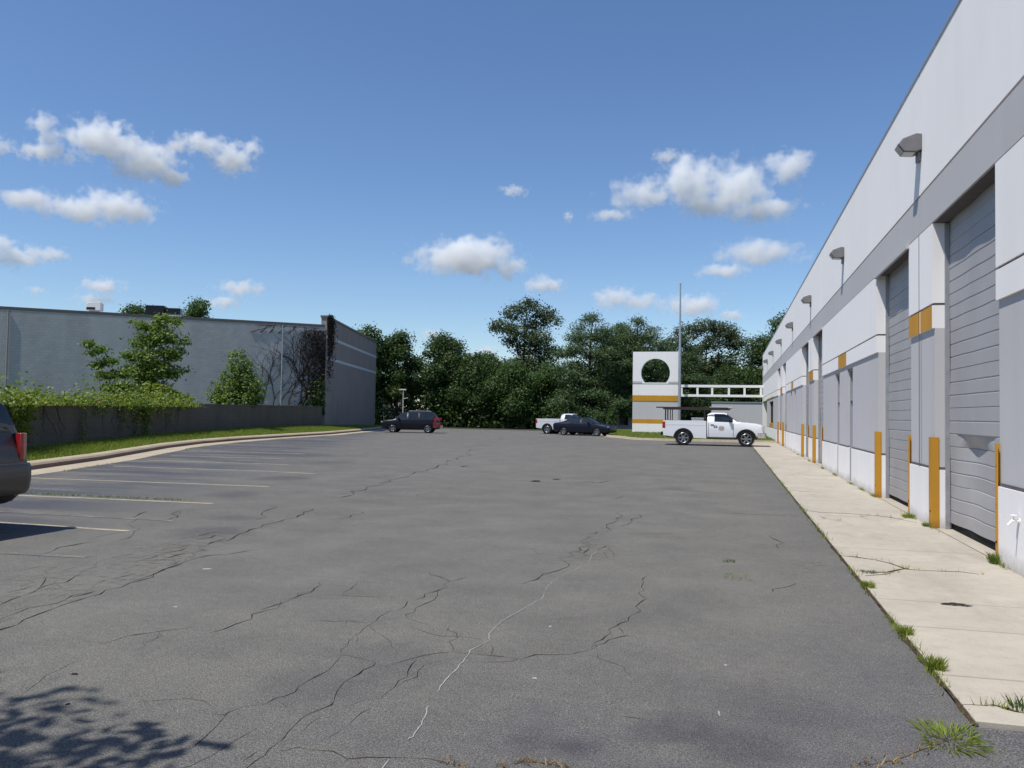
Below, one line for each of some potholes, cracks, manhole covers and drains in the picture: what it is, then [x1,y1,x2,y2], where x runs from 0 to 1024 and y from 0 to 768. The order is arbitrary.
crack [45,512,145,554]
crack [99,581,378,647]
crack [839,555,974,576]
crack [523,481,664,584]
crack [155,575,647,768]
